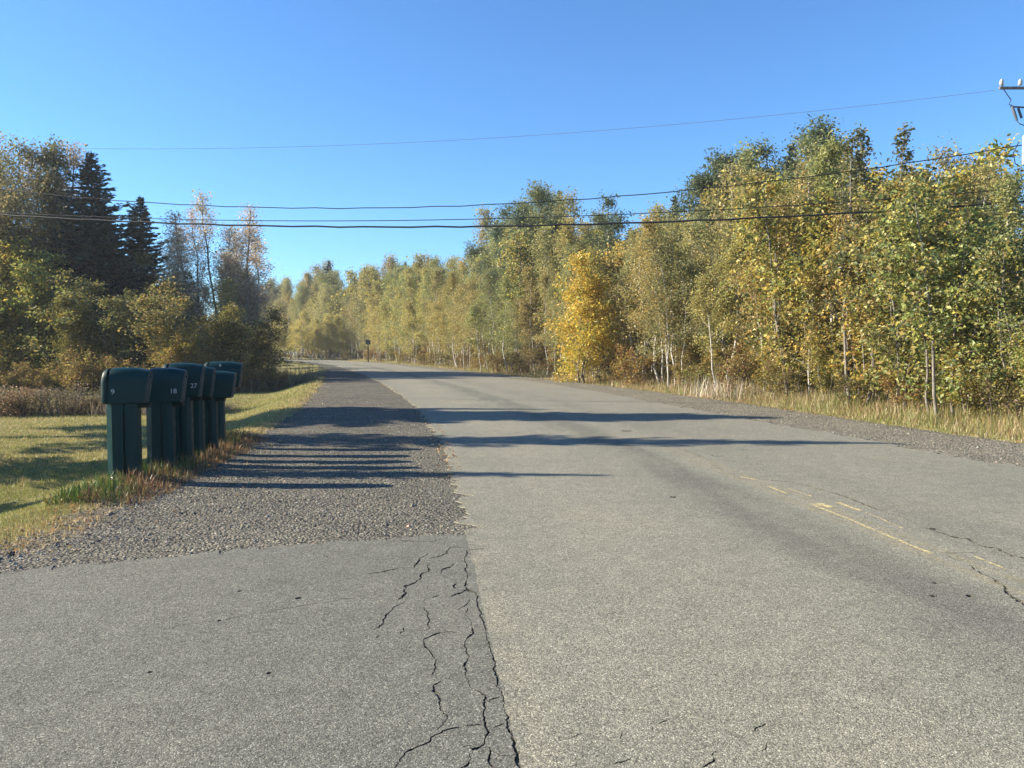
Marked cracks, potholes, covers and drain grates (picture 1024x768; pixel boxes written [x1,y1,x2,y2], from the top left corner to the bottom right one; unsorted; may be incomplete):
crack [753,476,1024,605]
crack [370,540,520,768]
